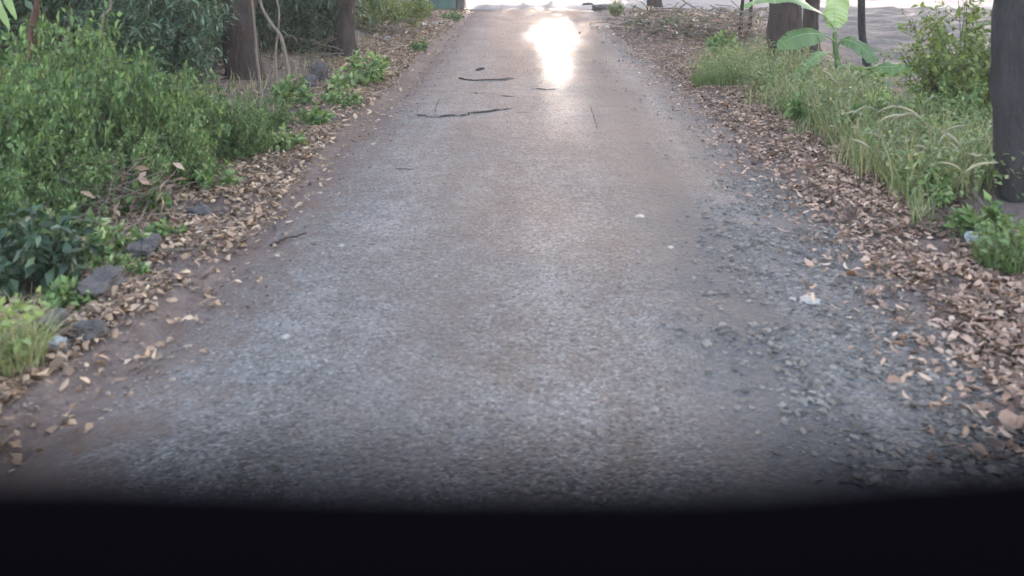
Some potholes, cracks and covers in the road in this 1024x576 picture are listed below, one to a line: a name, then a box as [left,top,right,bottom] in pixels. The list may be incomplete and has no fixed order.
crack [416,92,513,118]
